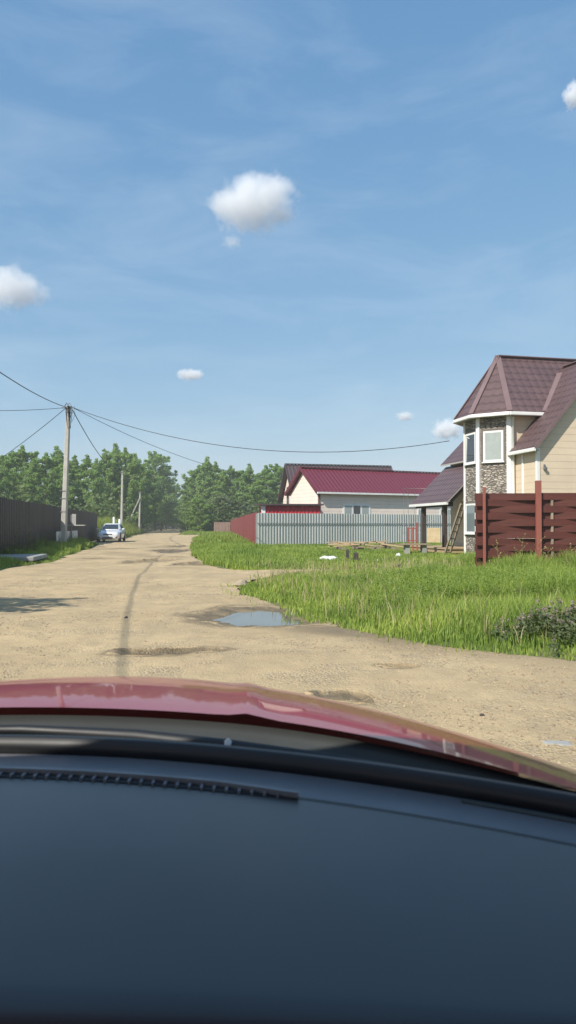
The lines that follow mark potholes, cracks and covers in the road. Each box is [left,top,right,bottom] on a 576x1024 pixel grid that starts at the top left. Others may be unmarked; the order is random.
pothole [304,688,375,704]
pothole [170,605,340,629]
pothole [102,646,235,656]
